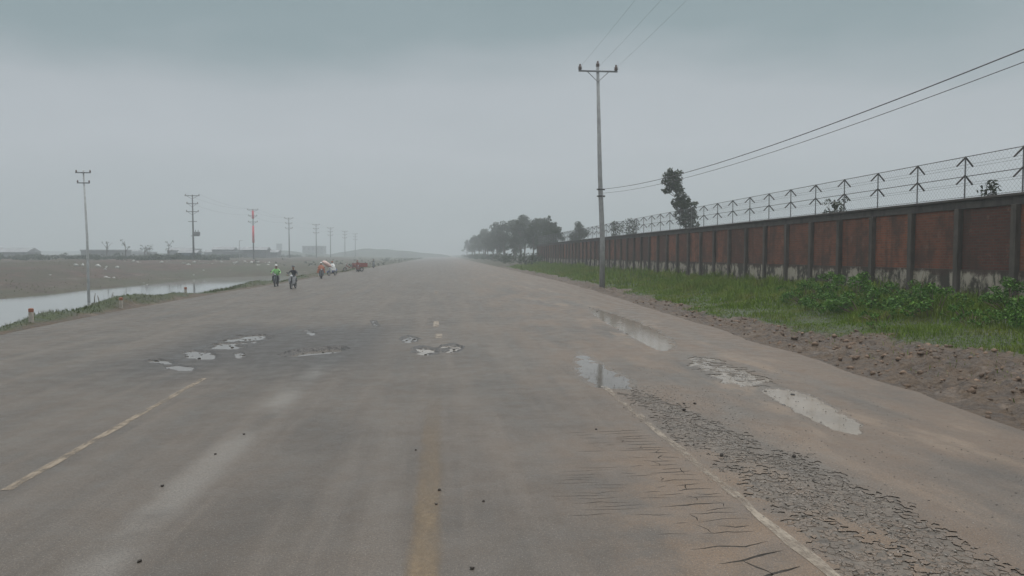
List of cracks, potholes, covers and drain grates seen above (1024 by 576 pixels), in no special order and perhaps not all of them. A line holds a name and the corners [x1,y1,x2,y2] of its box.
pothole [410,345,441,356]
pothole [399,335,422,343]
pothole [180,349,222,360]
pothole [277,345,351,357]
pothole [205,334,274,350]
pothole [758,388,865,435]
pothole [589,306,677,352]
crack [551,356,1024,576]
pothole [436,343,465,353]
